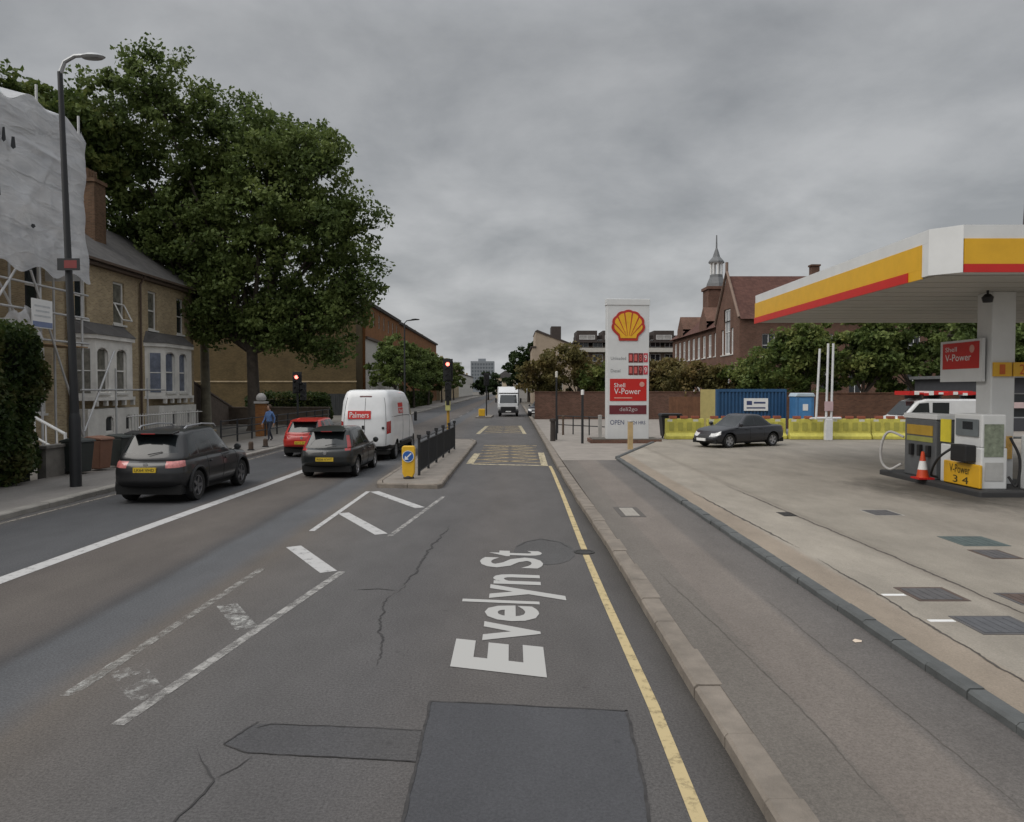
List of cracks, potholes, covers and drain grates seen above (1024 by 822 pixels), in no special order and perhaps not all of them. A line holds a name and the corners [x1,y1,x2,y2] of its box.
manhole cover [994,593,1024,605]
manhole cover [893,587,971,601]
crack [357,526,449,665]
manhole cover [937,536,1011,546]
manhole cover [949,616,1024,635]
manhole cover [613,507,646,517]
crack [172,752,254,822]
manhole cover [969,550,1024,559]
